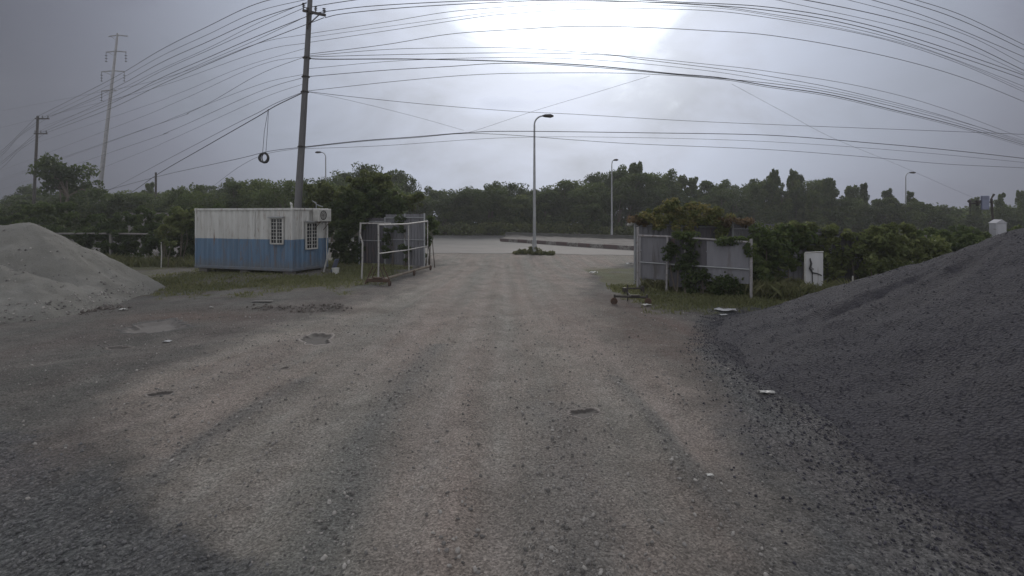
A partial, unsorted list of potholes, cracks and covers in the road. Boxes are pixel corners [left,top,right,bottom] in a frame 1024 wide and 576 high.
pothole [297,332,335,347]
pothole [115,318,198,334]
pothole [143,390,177,398]
pothole [566,407,605,420]
